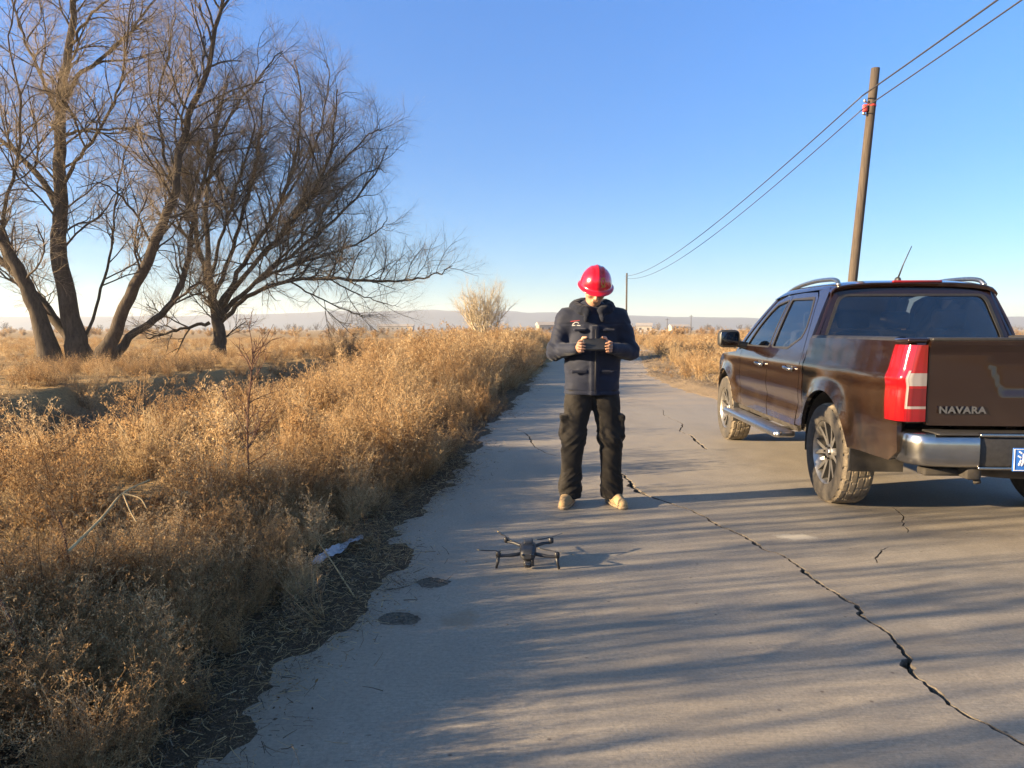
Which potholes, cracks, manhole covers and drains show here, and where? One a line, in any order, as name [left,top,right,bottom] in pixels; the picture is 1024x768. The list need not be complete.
pothole [414,577,451,588]
pothole [378,612,421,625]
crack [621,473,1024,746]
crack [663,410,707,449]
